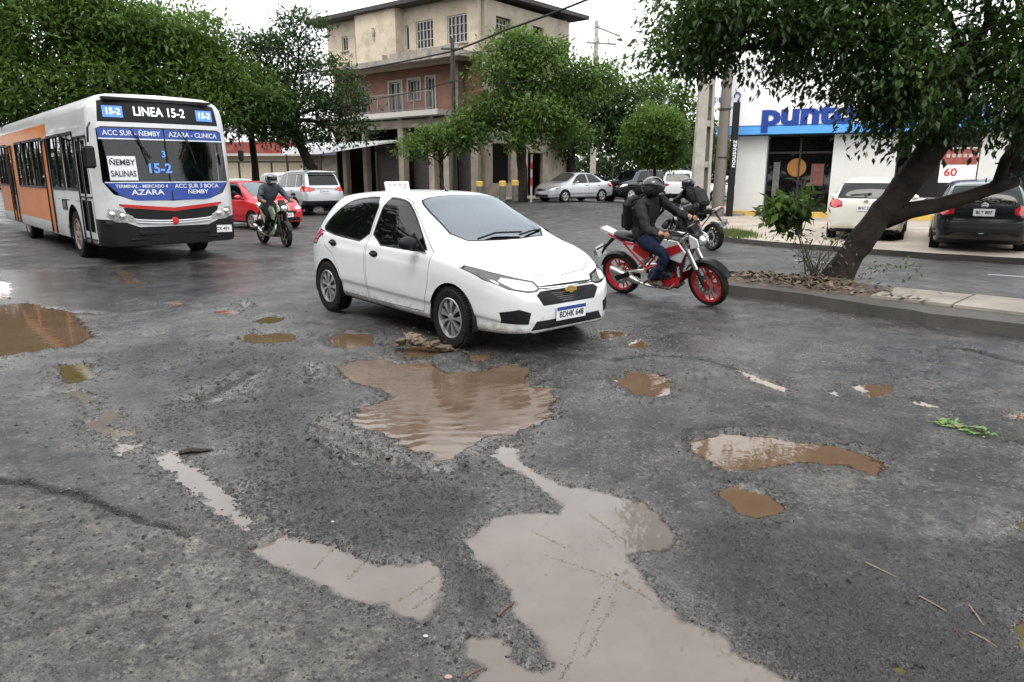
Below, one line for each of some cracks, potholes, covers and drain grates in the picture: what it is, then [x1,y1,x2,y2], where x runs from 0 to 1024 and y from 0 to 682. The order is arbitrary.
pothole [680,428,895,479]
pothole [329,351,568,463]
pothole [322,330,379,350]
crack [0,480,190,539]
pothole [232,329,306,345]
pothole [306,411,462,477]
pothole [608,368,676,398]
pothole [50,360,107,385]
pothole [708,478,795,520]
